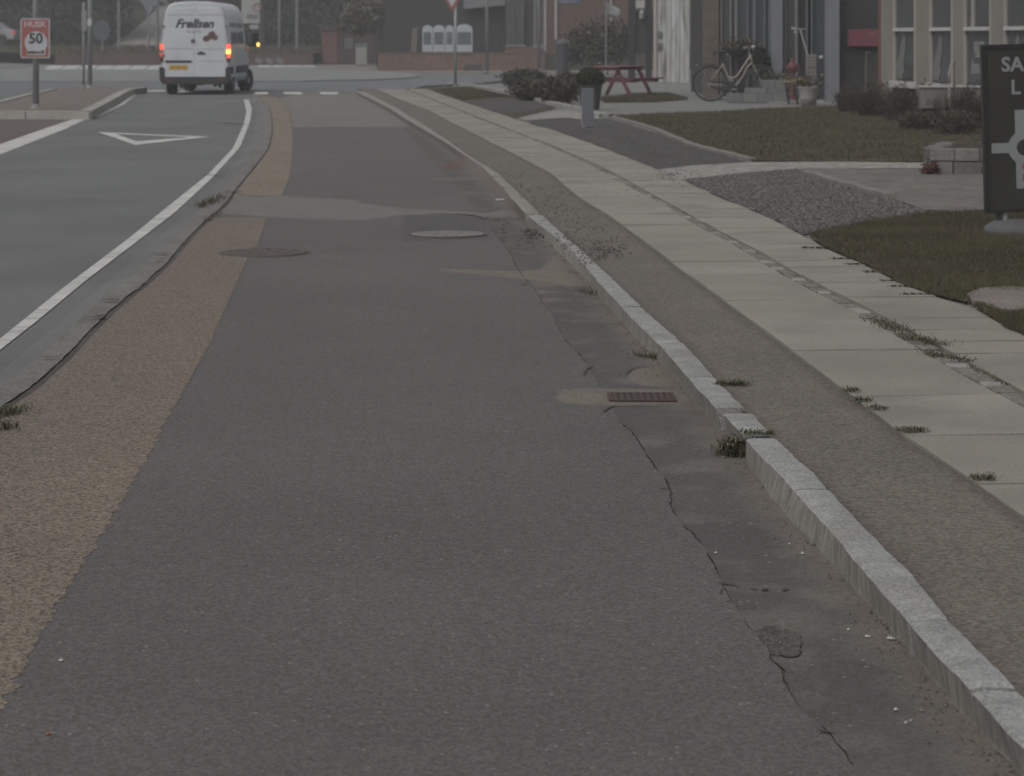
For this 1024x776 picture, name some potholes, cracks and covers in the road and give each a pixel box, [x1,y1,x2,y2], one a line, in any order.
manhole cover [407,231,488,239]
drain grate [607,392,677,402]
manhole cover [217,248,310,258]
crack [491,228,853,766]
